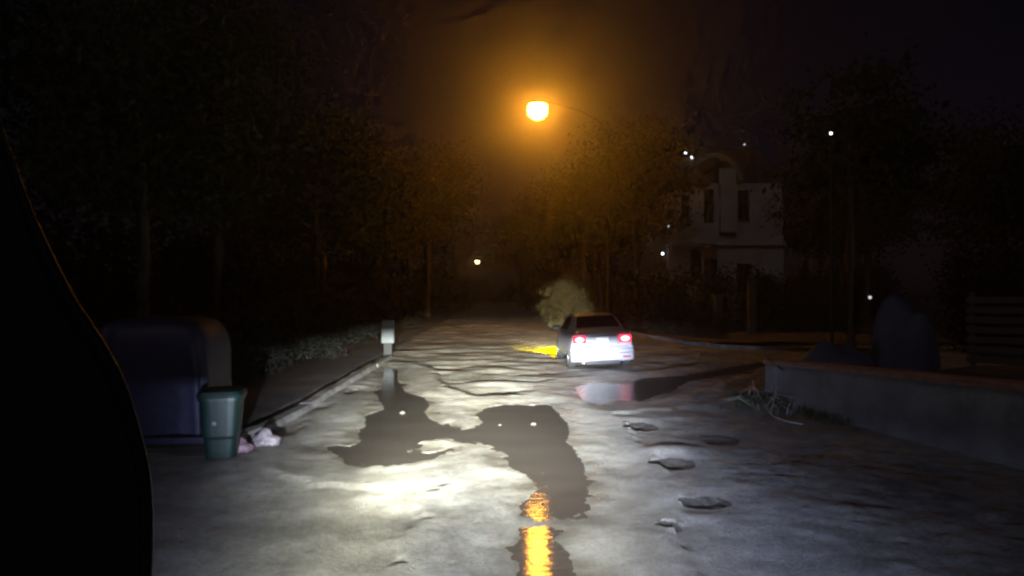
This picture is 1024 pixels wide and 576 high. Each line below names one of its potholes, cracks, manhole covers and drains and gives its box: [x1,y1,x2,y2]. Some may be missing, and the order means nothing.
pothole [678,495,733,510]
pothole [622,422,658,432]
pothole [654,518,683,532]
pothole [699,436,740,445]
pothole [647,457,696,470]
